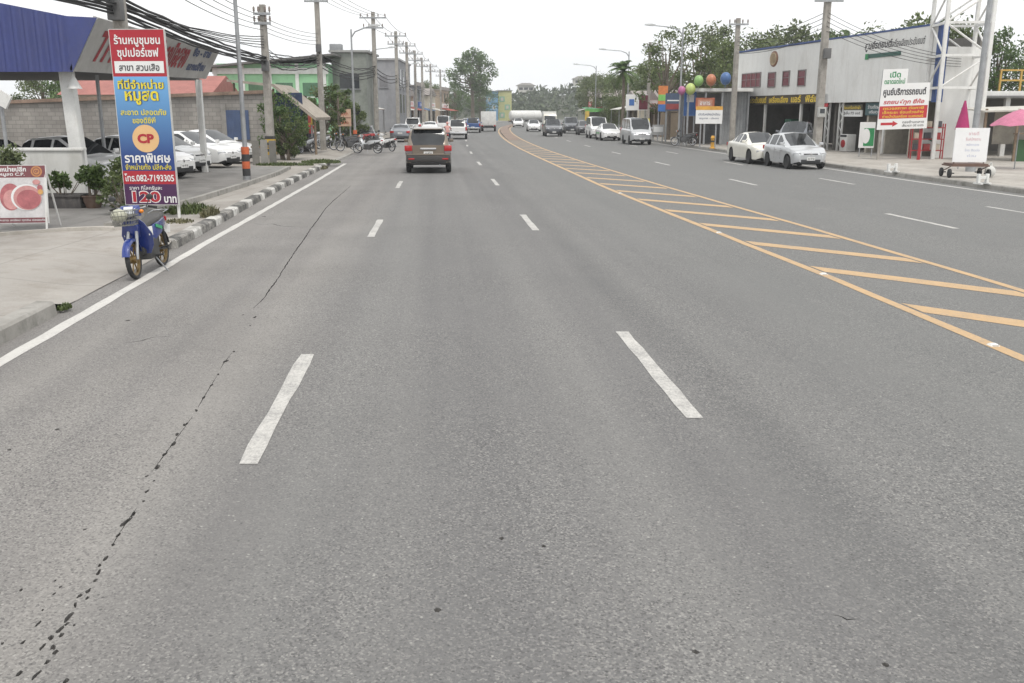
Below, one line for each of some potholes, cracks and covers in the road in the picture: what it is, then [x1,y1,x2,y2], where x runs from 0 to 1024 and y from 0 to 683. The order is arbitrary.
crack [1,189,347,683]
